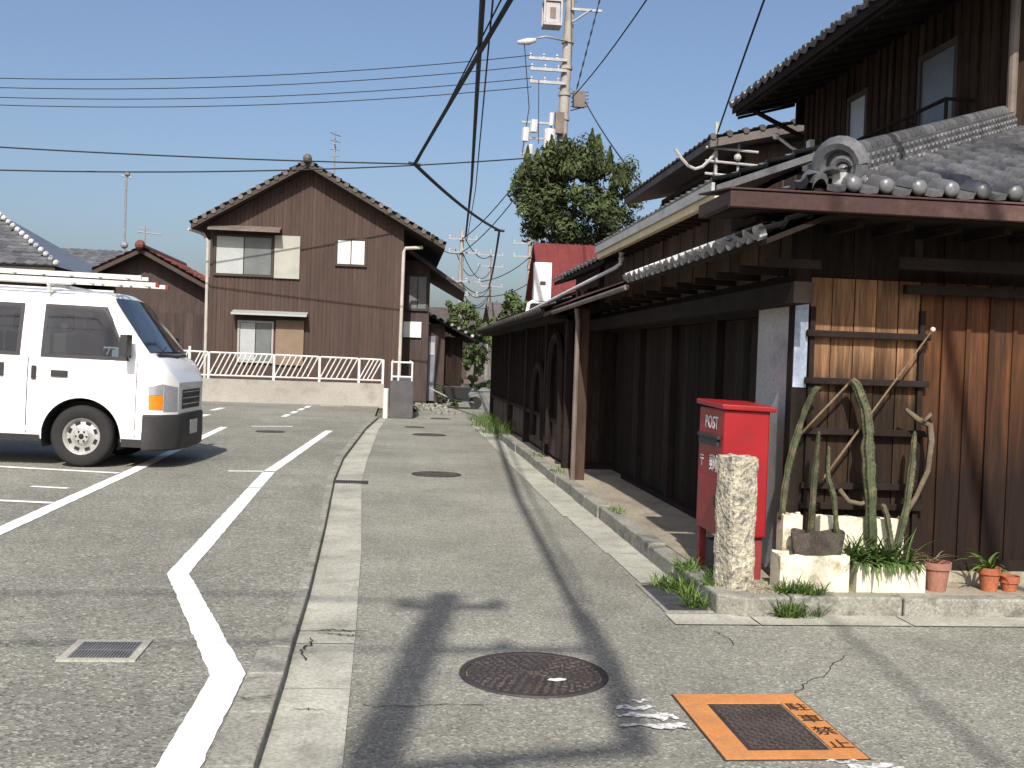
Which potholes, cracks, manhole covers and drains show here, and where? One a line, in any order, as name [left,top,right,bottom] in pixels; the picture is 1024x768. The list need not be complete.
drain grate [635,583,714,613]
manhole cover [459,652,609,698]
crack [300,628,362,660]
drain grate [55,639,153,662]
